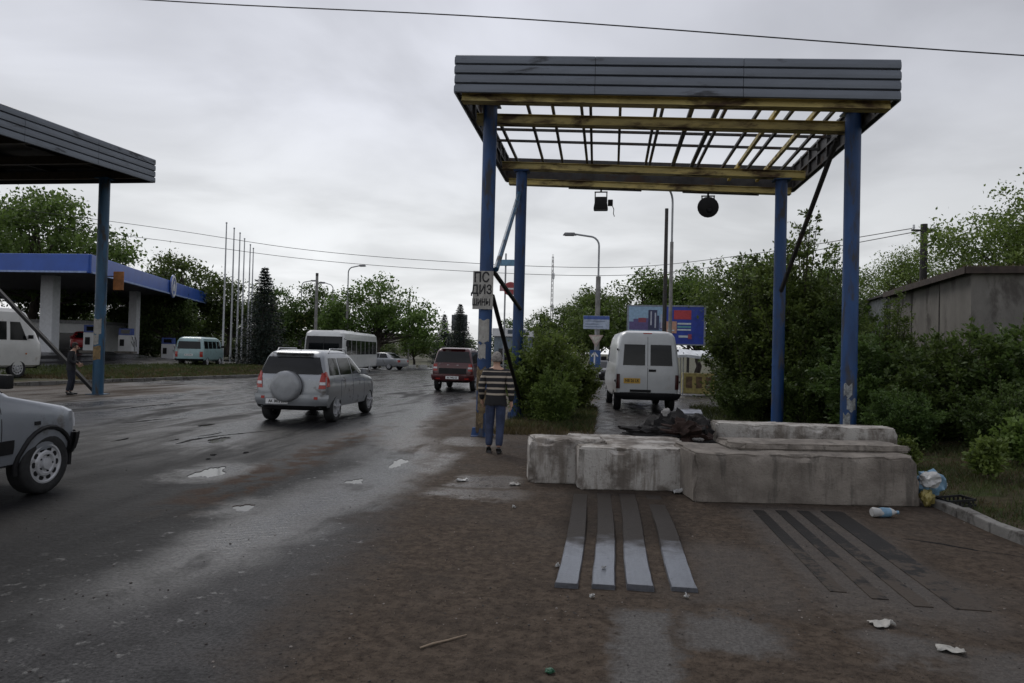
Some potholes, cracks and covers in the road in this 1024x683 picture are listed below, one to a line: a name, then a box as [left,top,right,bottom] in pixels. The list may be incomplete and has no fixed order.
crack [908,539,1021,557]
pothole [187,466,226,478]
